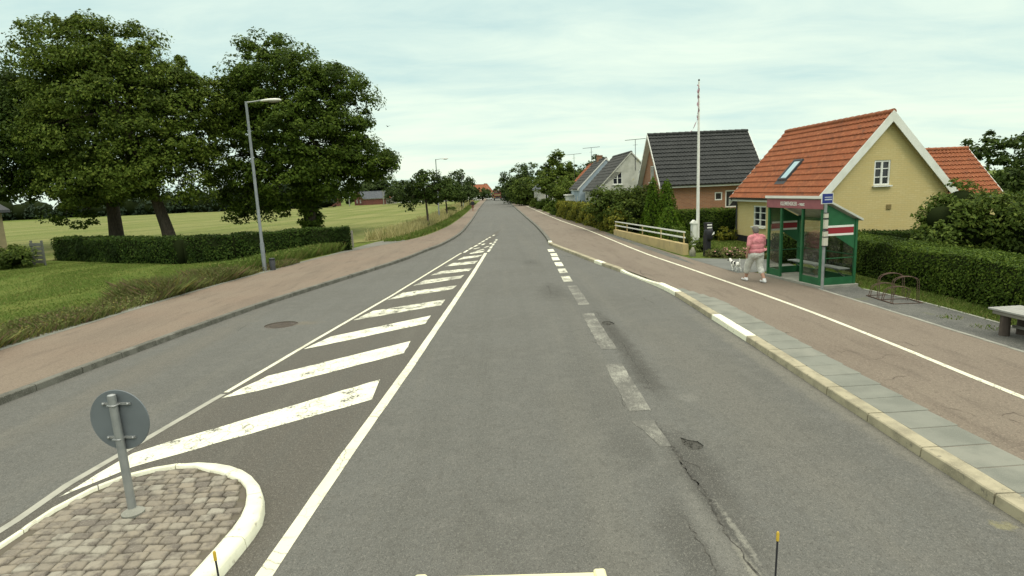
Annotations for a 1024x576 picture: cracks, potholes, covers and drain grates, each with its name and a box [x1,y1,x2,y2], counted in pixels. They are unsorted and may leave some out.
pothole [680,437,704,450]
crack [655,421,761,576]
manhole cover [264,321,298,329]
